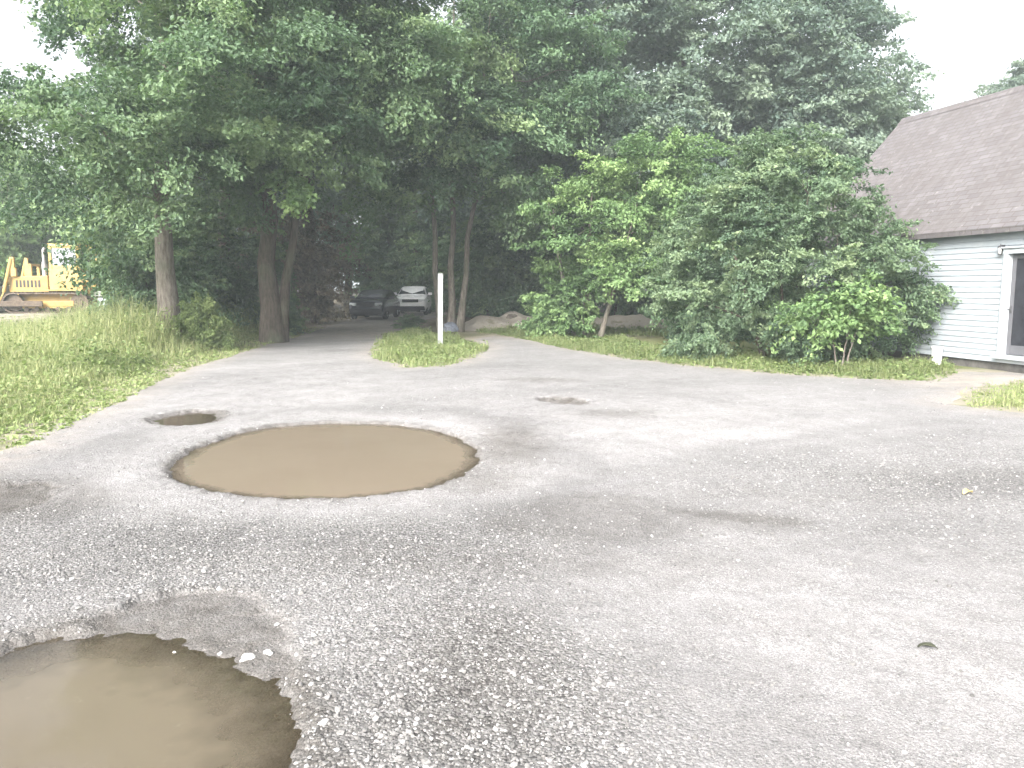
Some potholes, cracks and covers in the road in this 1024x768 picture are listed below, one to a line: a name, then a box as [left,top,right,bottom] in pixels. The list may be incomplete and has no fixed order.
pothole [518,393,608,406]
pothole [0,570,384,768]
pothole [138,417,506,507]
pothole [126,406,245,429]
